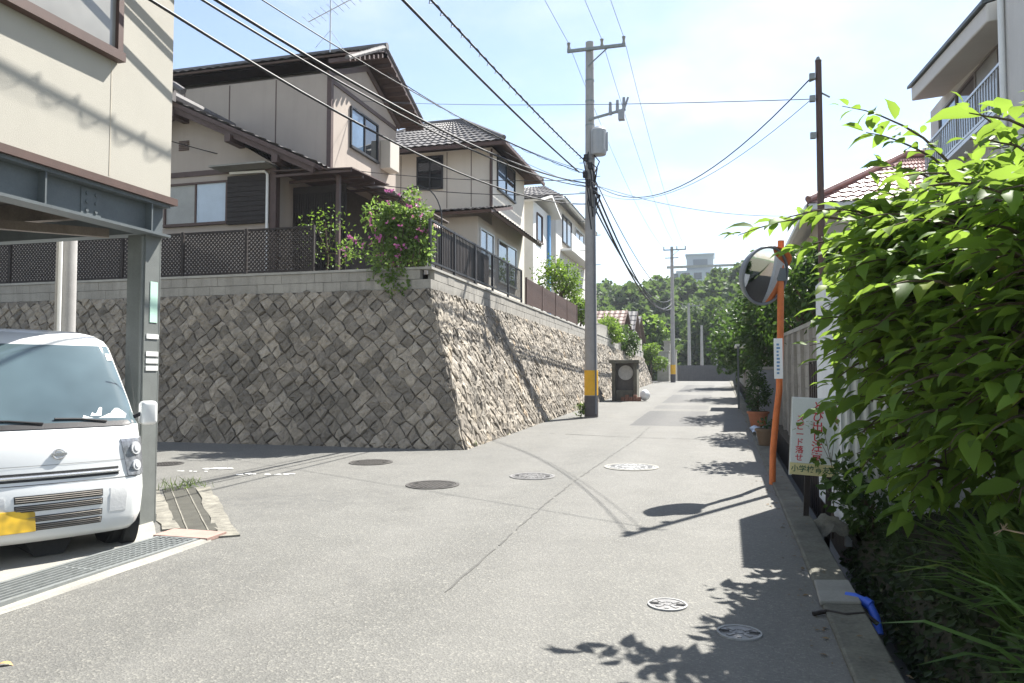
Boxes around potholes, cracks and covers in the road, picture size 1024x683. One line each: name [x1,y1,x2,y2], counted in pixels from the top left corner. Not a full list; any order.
drain grate [0,536,199,607]
manhole cover [604,463,659,471]
manhole cover [510,472,555,480]
manhole cover [648,598,688,612]
manhole cover [717,624,762,641]
manhole cover [406,480,459,490]
